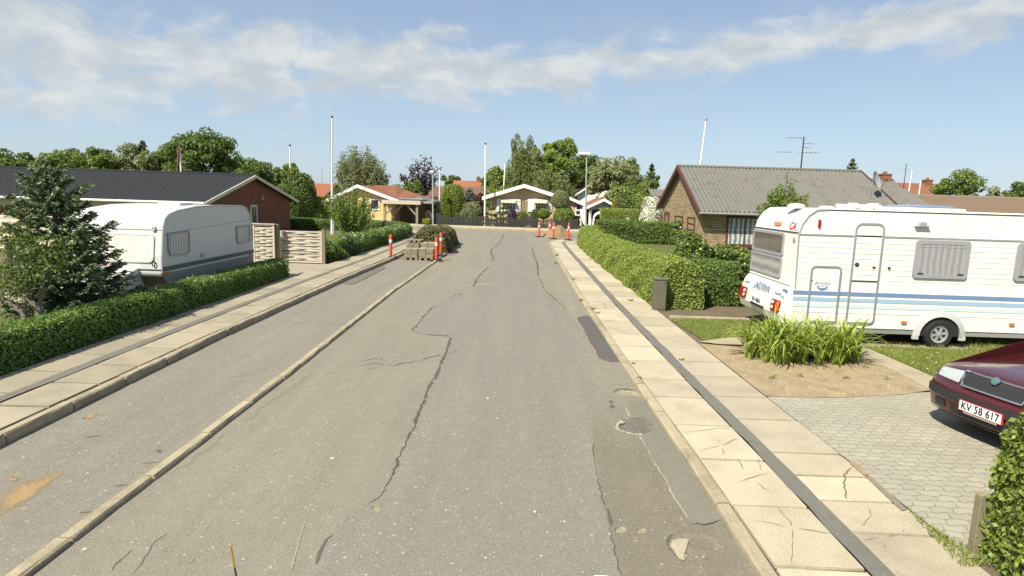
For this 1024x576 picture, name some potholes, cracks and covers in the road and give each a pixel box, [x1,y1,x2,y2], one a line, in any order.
crack [639,428,766,525]
crack [111,535,165,571]
crack [328,235,504,374]
pothole [666,532,724,567]
